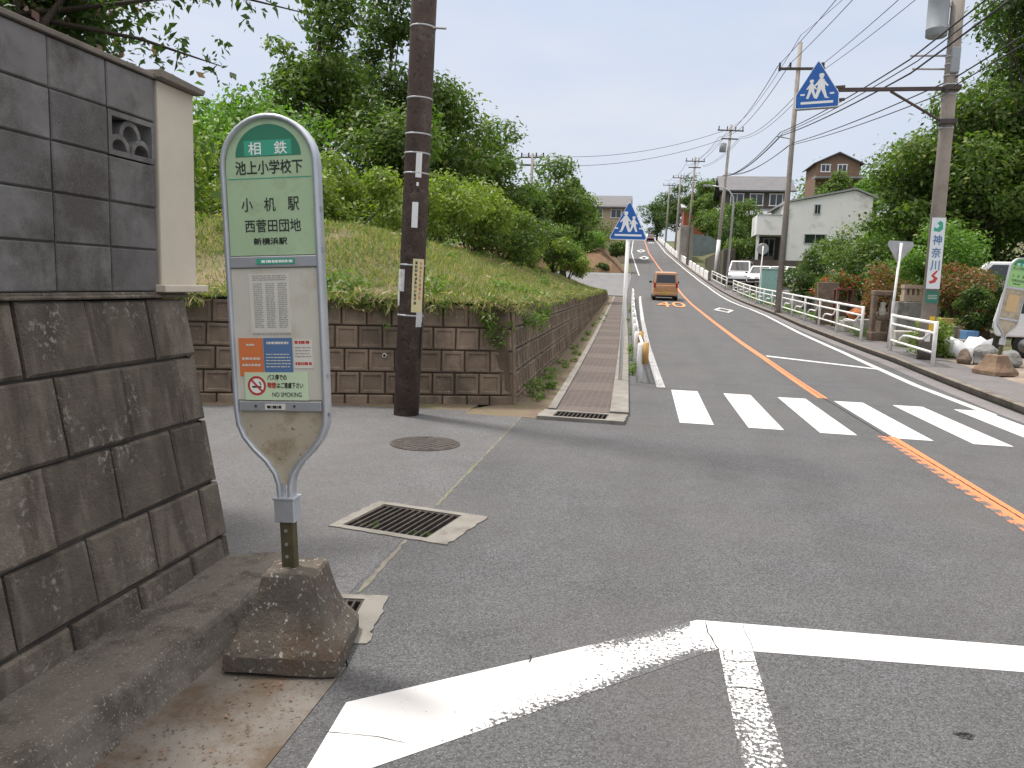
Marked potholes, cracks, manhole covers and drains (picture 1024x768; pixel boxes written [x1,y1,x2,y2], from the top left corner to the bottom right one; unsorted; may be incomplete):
manhole cover [390,436,460,451]
drain grate [341,594,389,645]
crack [705,621,757,662]
drain grate [536,409,628,425]
drain grate [328,501,488,546]
